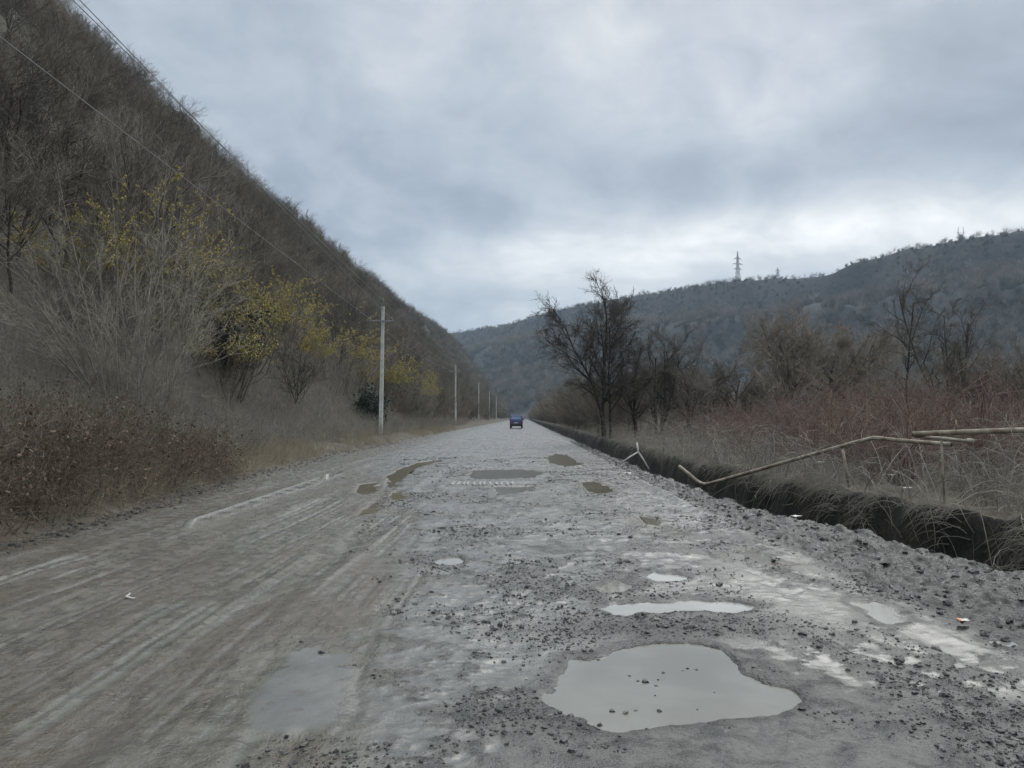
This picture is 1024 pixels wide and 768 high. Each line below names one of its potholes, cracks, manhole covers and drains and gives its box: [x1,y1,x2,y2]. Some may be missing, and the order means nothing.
pothole [465,468,543,479]
pothole [634,569,692,582]
pothole [581,480,616,494]
pothole [356,497,384,515]
pothole [381,459,444,487]
pothole [546,453,583,467]
pothole [353,481,382,495]
